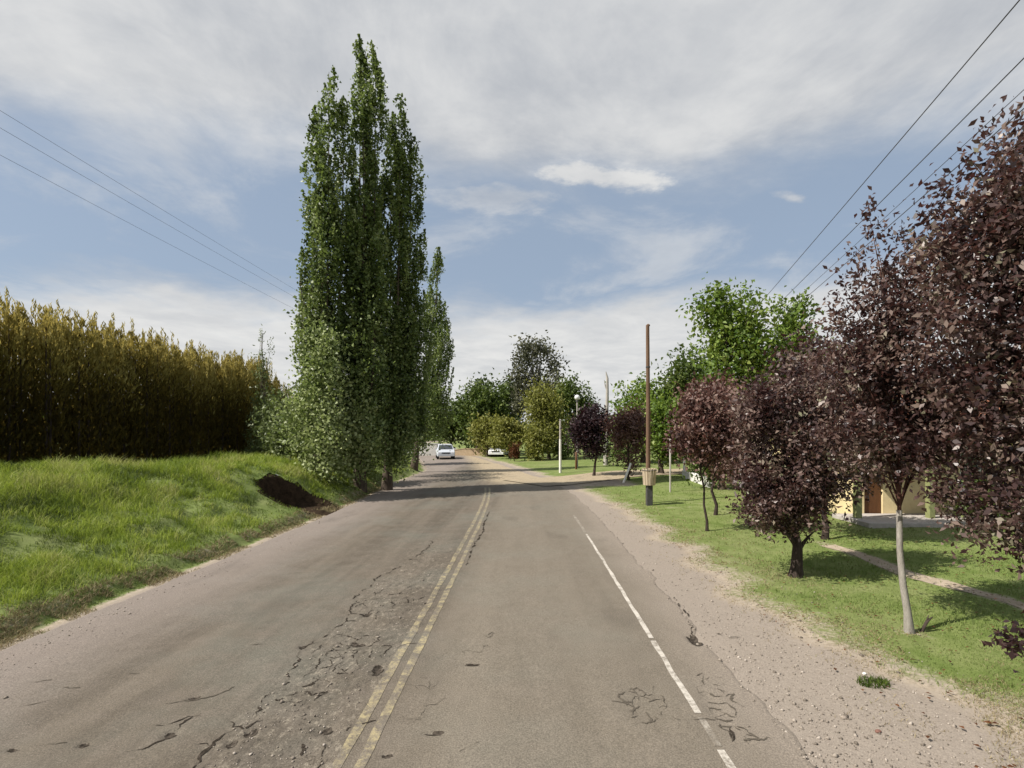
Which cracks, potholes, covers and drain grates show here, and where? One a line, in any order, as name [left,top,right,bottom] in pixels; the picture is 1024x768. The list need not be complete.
crack [617,673,770,744]
crack [127,539,438,768]
crack [466,513,489,565]
